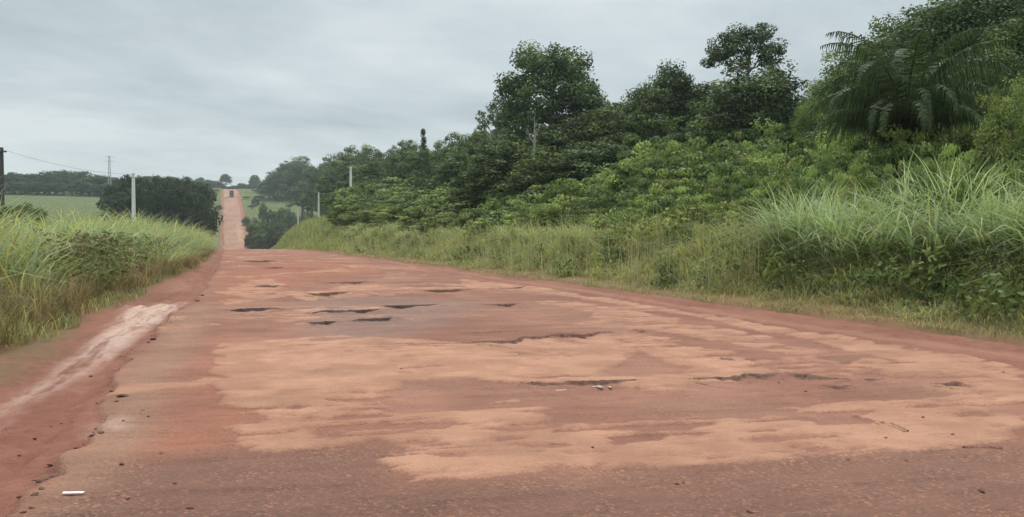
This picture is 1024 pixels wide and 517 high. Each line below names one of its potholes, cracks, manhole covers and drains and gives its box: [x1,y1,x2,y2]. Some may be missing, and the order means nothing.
pothole [779,372,857,385]
pothole [375,304,469,313]
pothole [301,321,343,329]
pothole [461,331,644,355]
pothole [478,303,528,311]
pothole [679,372,803,393]
pothole [516,379,645,402]
pothole [220,308,286,317]
pothole [342,315,416,324]
